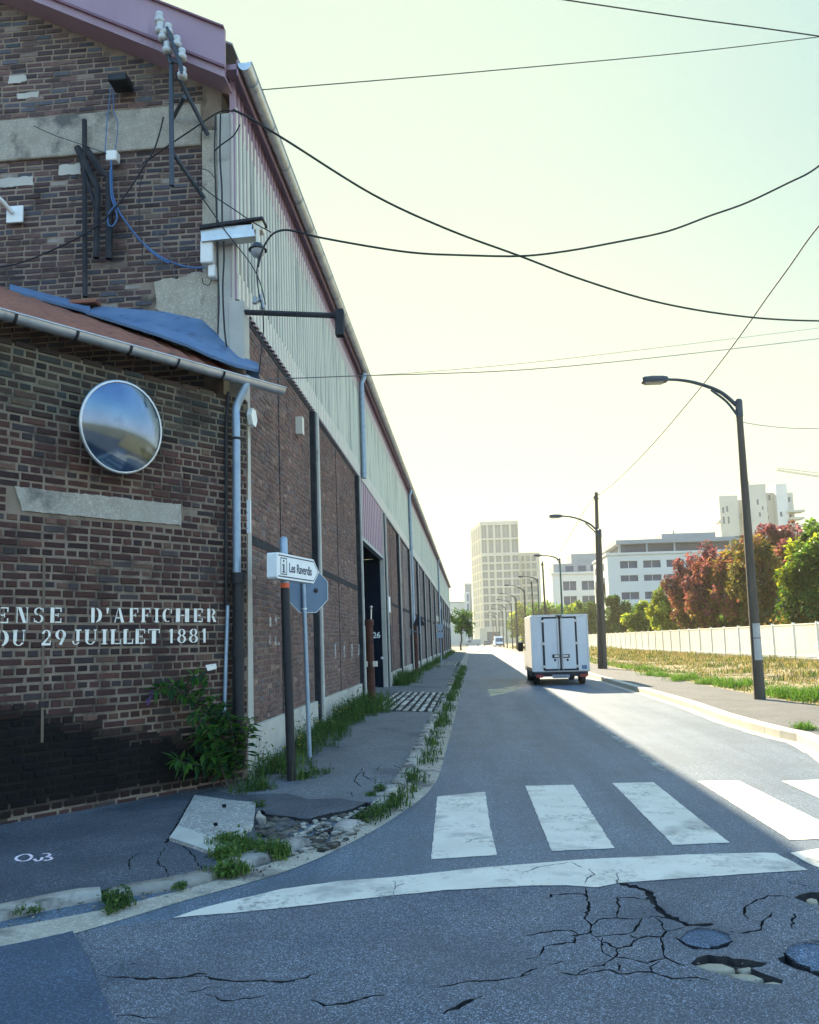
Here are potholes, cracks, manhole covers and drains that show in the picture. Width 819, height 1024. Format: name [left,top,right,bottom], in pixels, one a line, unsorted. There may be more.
pothole [254,802,371,838]
crack [101,964,383,1006]
crack [157,844,202,877]
pothole [795,892,819,905]
pothole [691,955,783,984]
crack [437,879,819,988]
